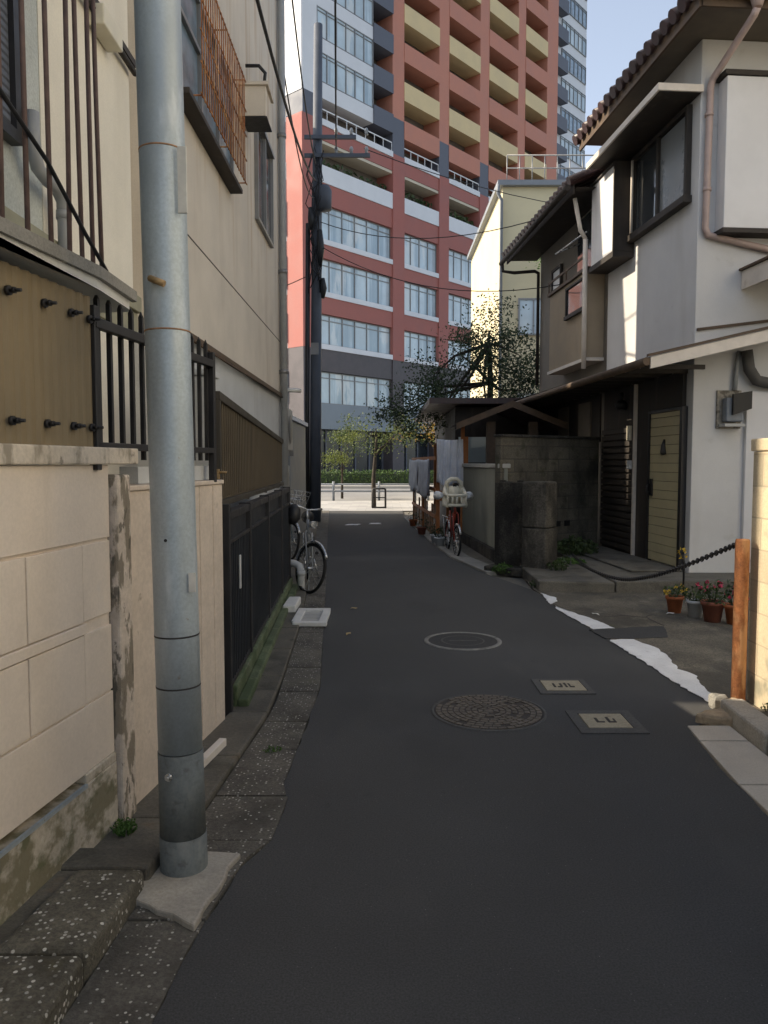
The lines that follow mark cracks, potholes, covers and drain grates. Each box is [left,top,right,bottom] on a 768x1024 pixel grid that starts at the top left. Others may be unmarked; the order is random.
manhole cover [431,694,547,732]
manhole cover [424,632,502,651]
utility cover [531,679,596,695]
utility cover [565,710,650,734]
